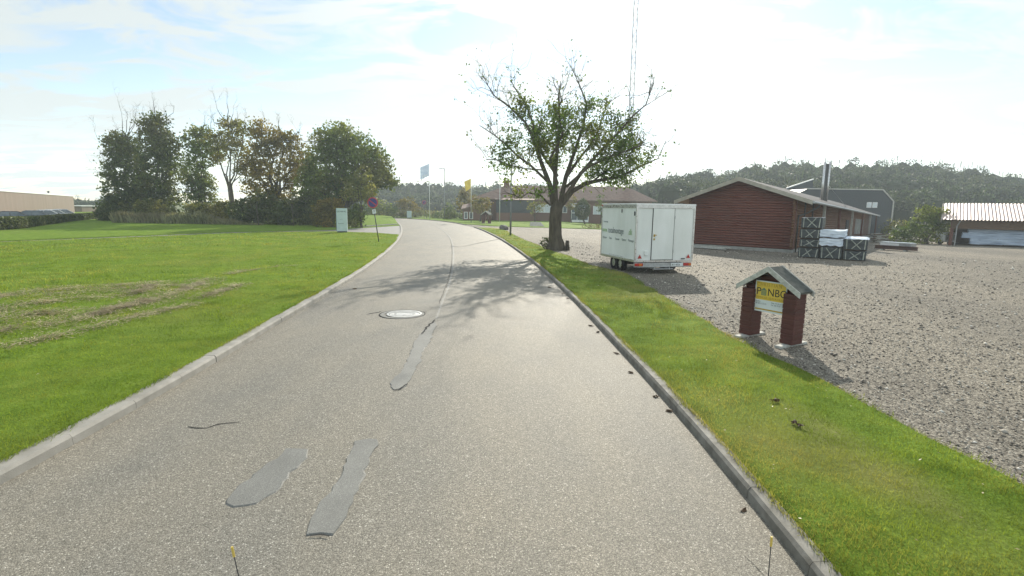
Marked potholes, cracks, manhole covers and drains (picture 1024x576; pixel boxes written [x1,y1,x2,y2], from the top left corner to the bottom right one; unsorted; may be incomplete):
manhole cover [379,310,425,319]
